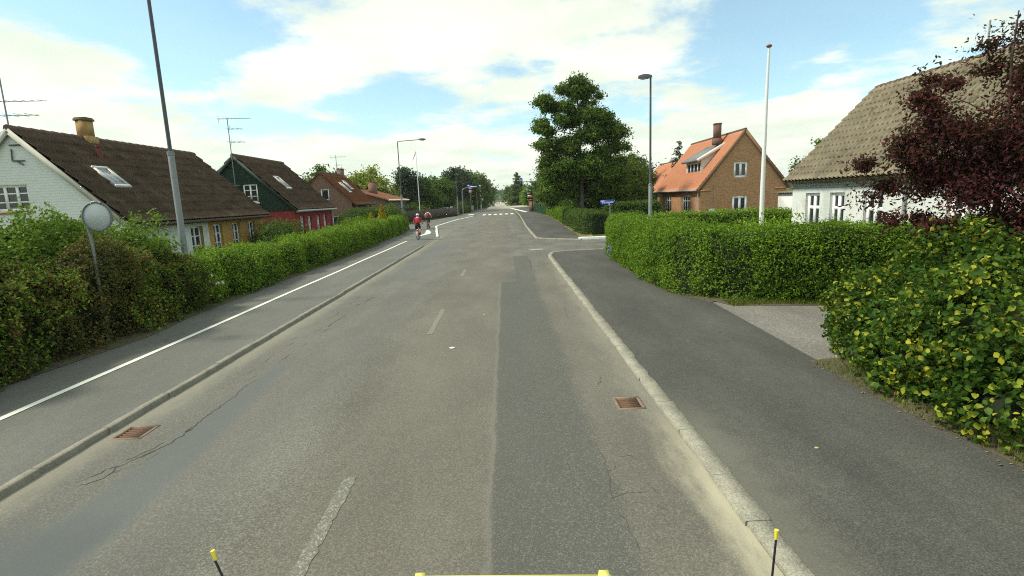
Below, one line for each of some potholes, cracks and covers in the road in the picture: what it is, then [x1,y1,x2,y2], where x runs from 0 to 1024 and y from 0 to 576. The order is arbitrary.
drain grate [612,396,647,410]
drain grate [109,425,161,440]
crack [77,337,305,487]
crack [600,452,670,552]
